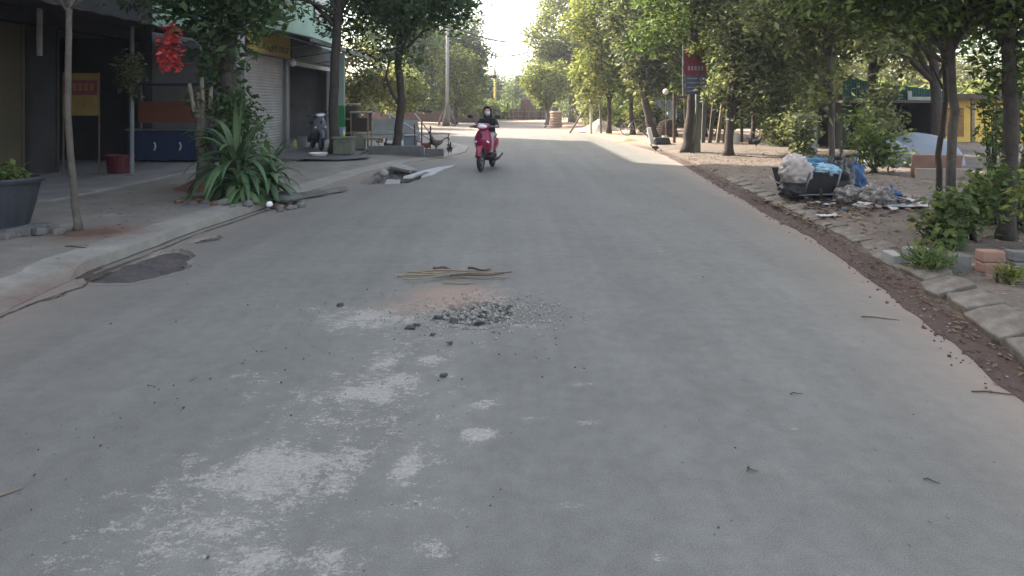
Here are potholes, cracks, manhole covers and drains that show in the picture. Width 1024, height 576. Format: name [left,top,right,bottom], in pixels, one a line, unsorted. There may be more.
pothole [357,167,435,185]
pothole [429,299,520,330]
